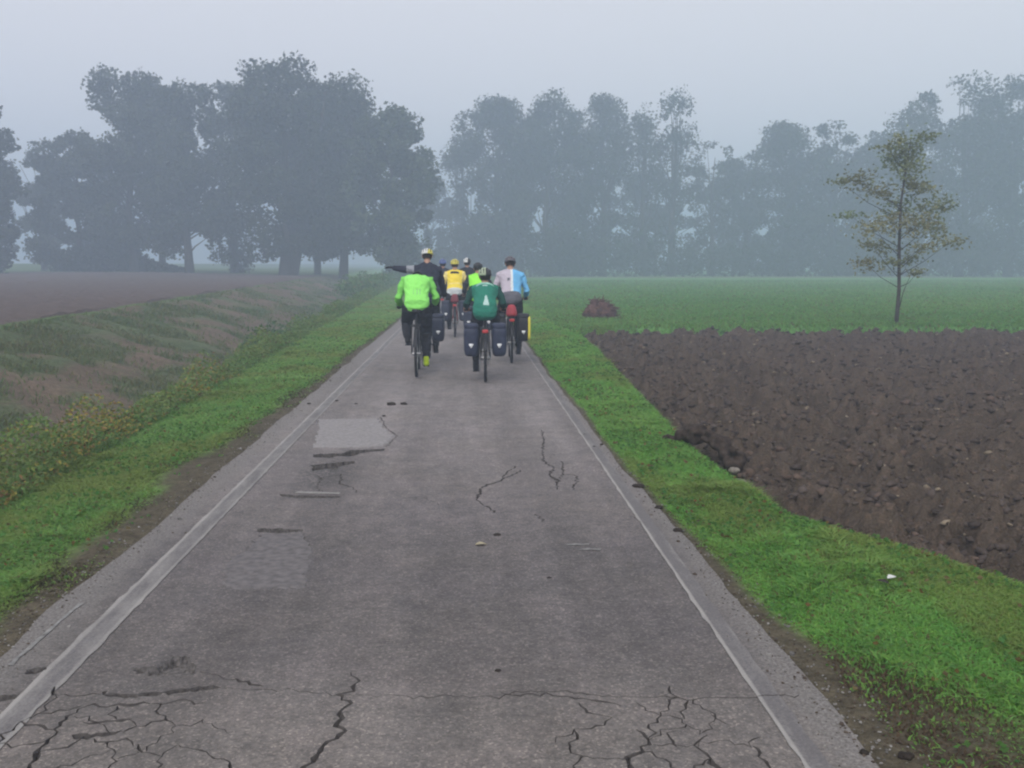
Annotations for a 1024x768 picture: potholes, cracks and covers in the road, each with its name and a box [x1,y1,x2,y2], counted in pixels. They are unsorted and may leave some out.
crack [541,430,579,490]
pothole [310,461,355,472]
crack [476,466,521,513]
crack [203,672,798,768]
crack [0,688,233,768]
crack [316,474,357,493]
